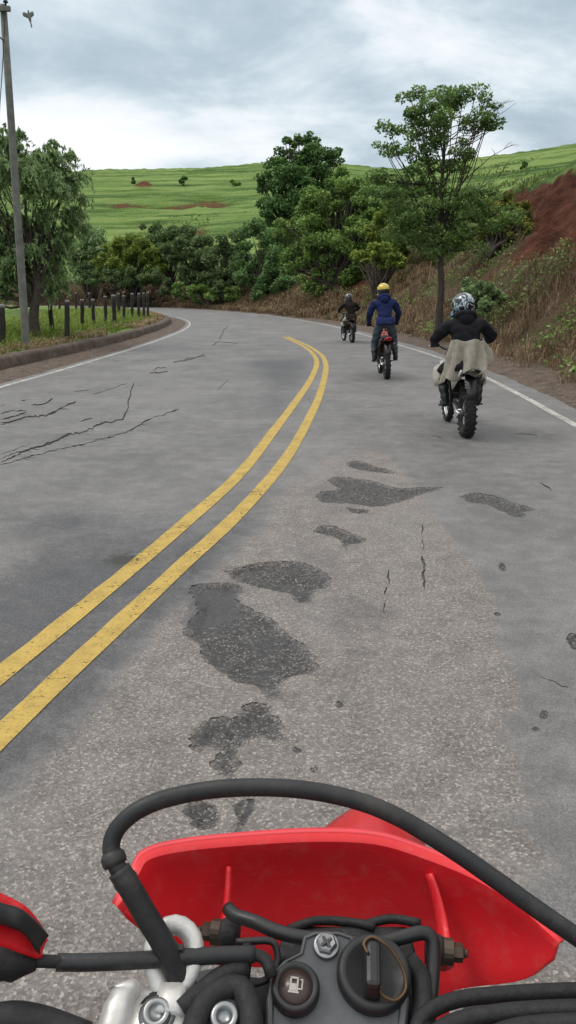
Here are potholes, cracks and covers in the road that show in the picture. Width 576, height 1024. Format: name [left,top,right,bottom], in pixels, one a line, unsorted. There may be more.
crack [0,327,236,465]
